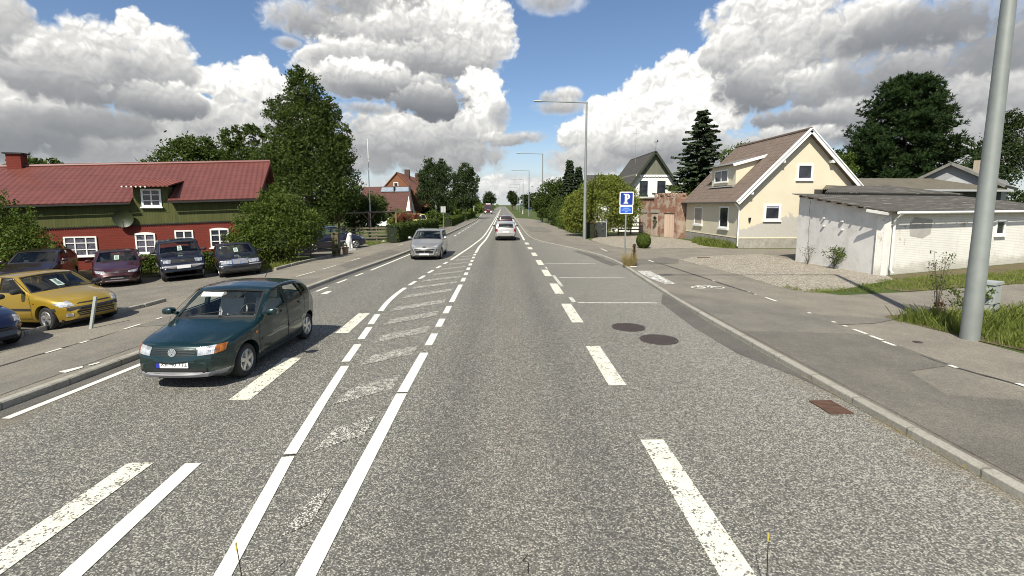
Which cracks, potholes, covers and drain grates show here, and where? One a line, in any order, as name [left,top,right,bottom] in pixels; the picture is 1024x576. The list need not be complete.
drain grate [809,400,854,414]
manhole cover [639,334,679,345]
manhole cover [611,323,646,332]
